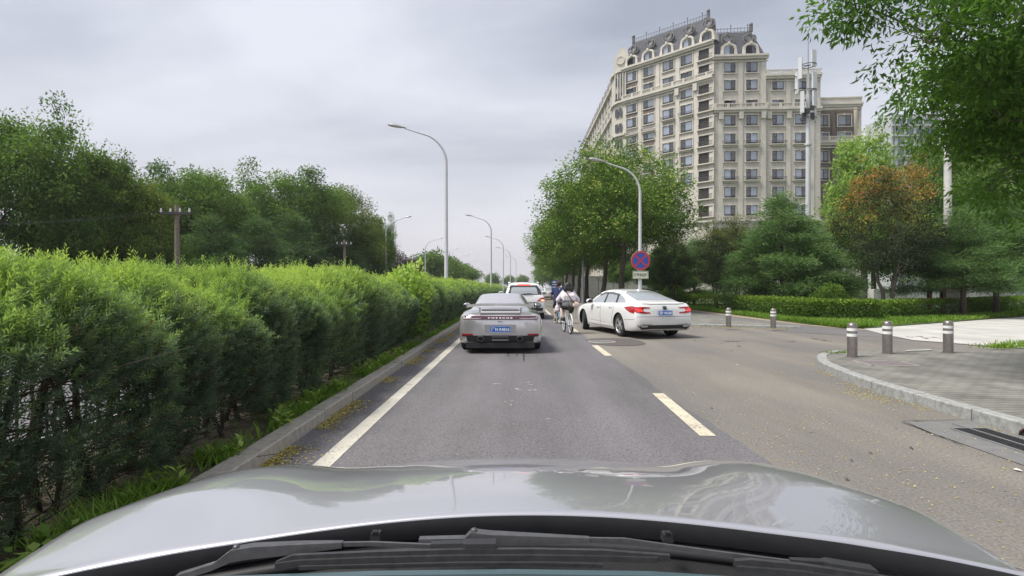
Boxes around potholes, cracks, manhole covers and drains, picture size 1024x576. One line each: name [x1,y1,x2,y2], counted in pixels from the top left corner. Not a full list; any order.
drain grate [950,423,1024,453]
